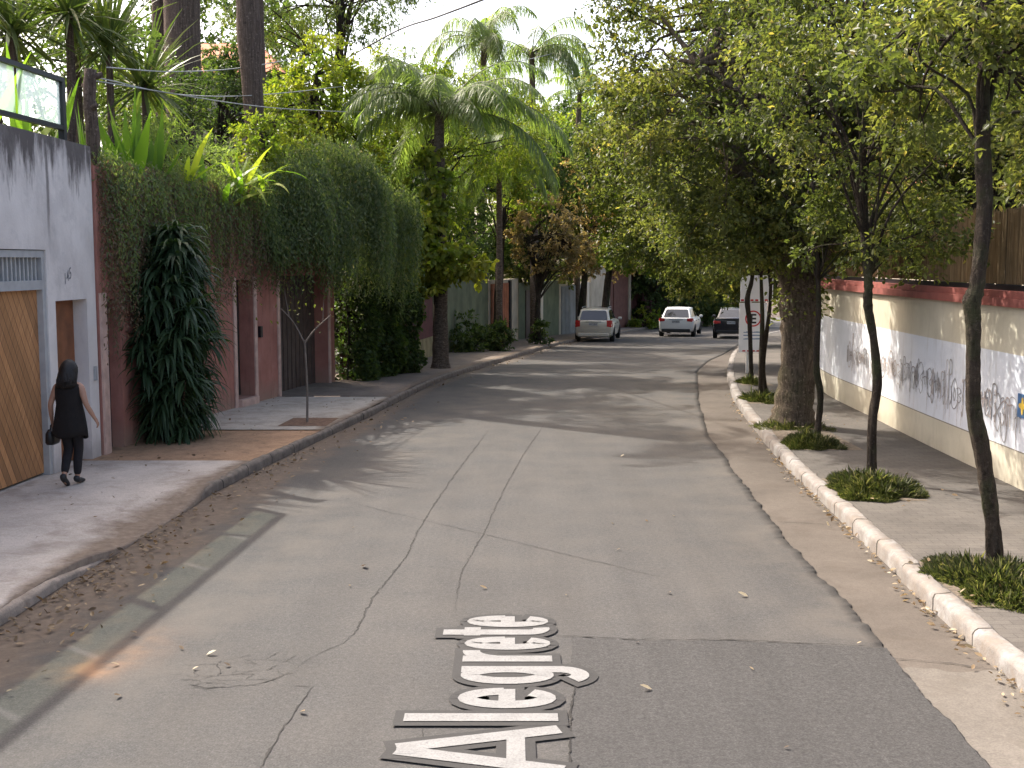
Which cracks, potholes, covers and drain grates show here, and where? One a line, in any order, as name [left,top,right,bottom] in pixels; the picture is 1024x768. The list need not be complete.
crack [281,435,665,677]
crack [260,685,314,768]
